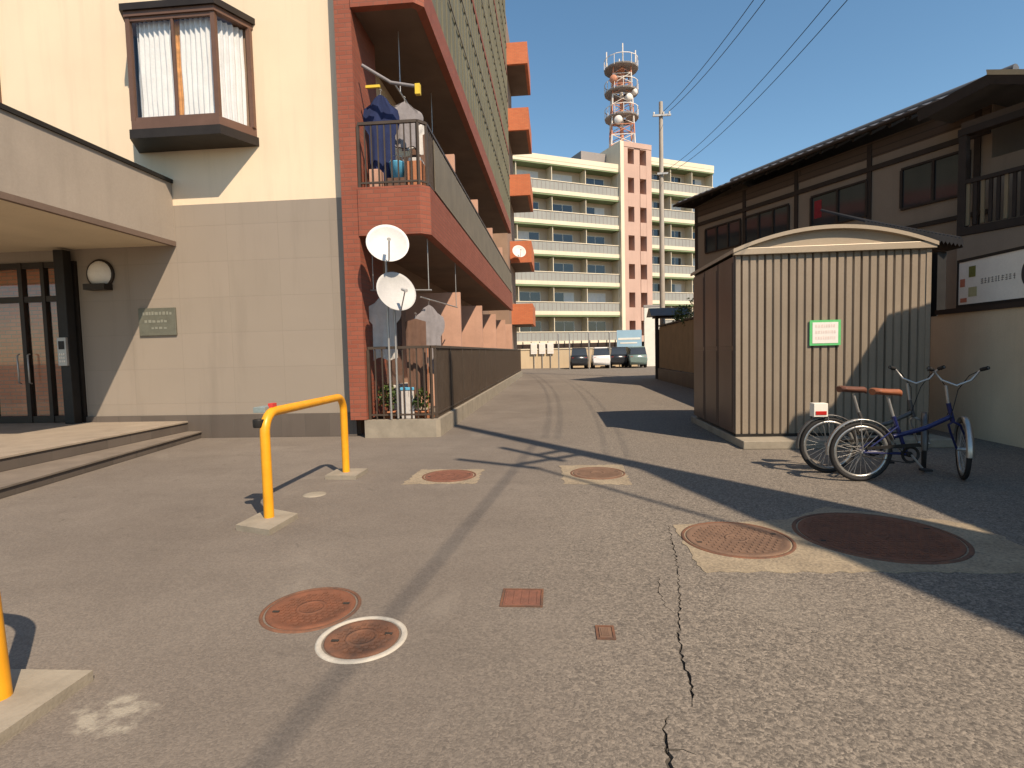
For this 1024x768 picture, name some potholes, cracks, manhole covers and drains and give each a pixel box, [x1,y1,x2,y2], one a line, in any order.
manhole cover [315,616,408,664]
manhole cover [681,522,797,559]
manhole cover [259,587,361,634]
manhole cover [422,470,476,482]
manhole cover [570,467,625,480]
crack [652,526,697,768]
manhole cover [792,512,975,565]
